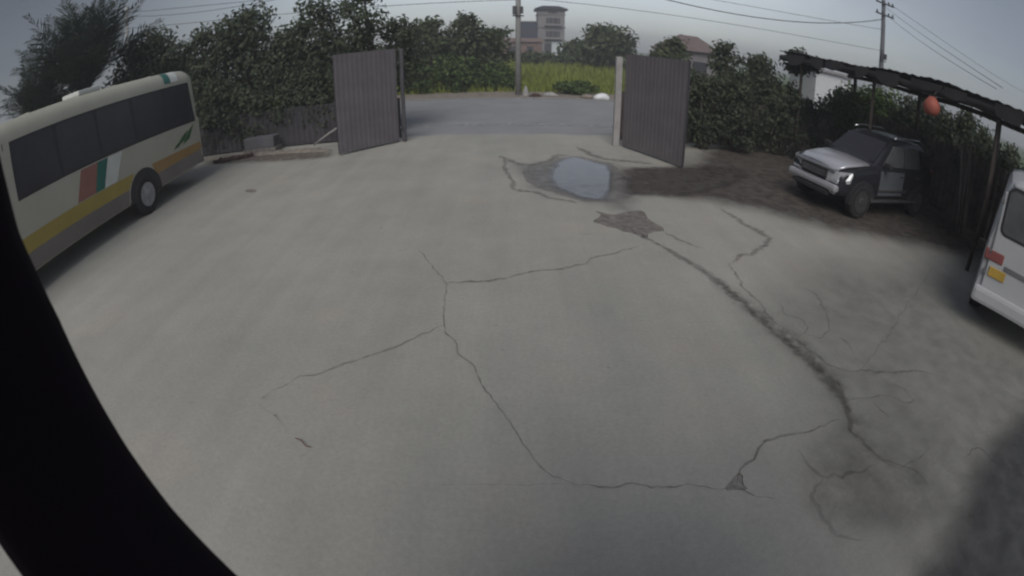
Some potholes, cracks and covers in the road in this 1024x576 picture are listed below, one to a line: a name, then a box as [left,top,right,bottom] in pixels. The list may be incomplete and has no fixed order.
pothole [522,156,637,202]
